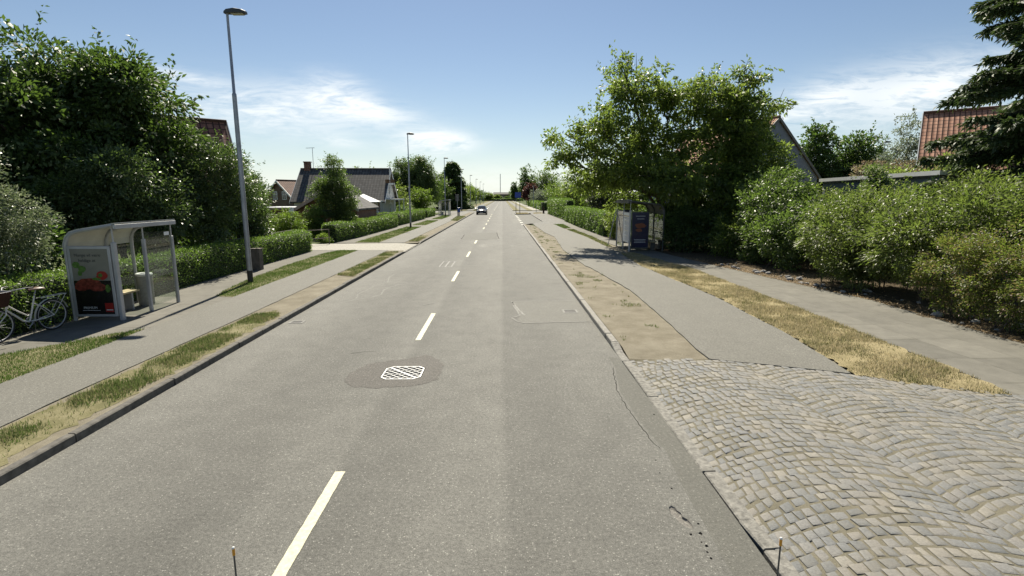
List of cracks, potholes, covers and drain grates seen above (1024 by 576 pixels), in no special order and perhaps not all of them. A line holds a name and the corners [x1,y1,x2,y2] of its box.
crack [613,368,661,450]
pothole [669,506,693,528]
